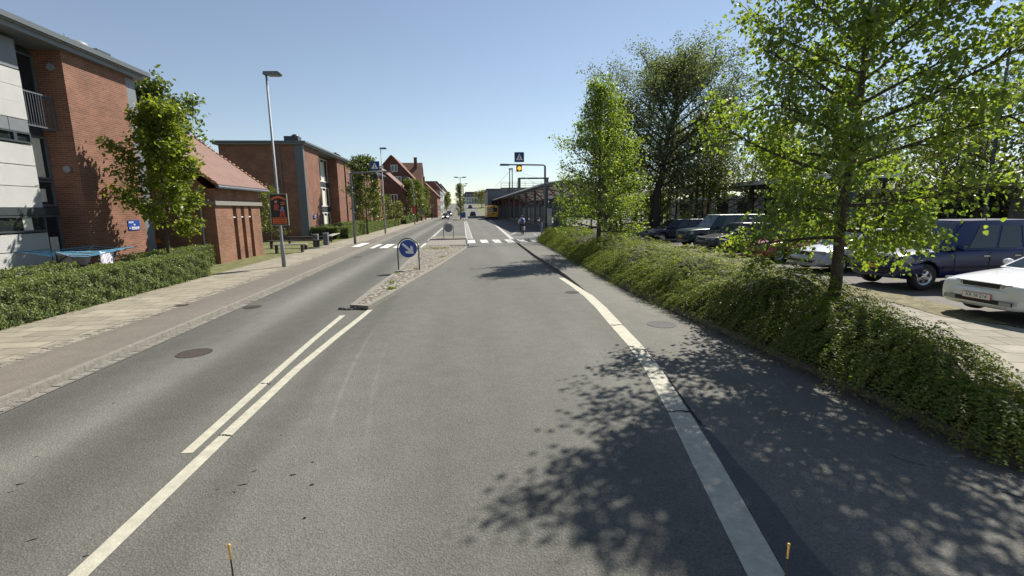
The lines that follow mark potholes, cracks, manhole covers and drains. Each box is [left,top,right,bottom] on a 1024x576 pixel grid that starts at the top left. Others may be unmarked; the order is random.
manhole cover [175,348,213,358]
